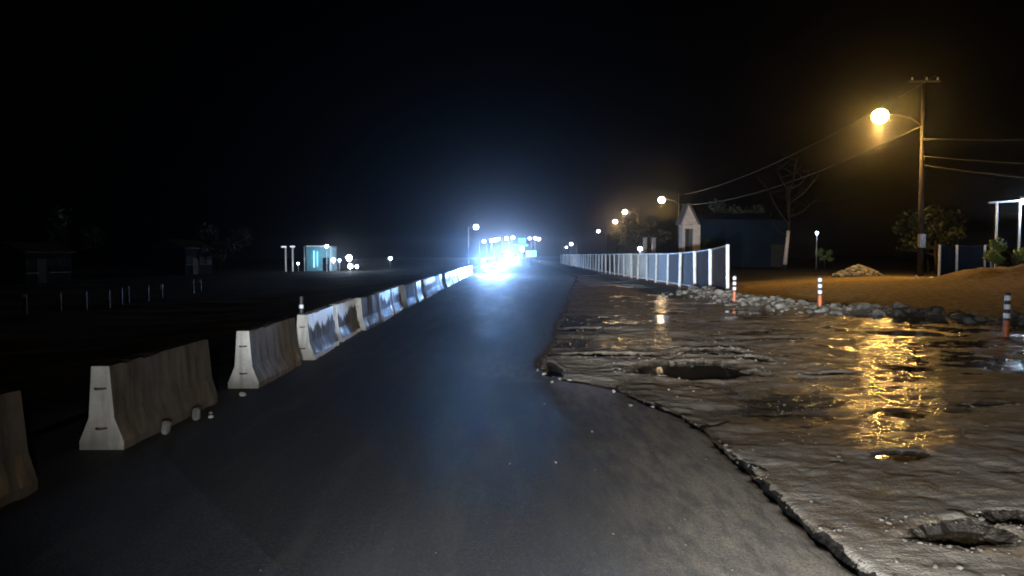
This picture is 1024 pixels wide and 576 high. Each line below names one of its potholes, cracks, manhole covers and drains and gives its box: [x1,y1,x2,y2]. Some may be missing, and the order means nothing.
pothole [898,518,1023,551]
pothole [629,361,763,381]
crack [617,391,877,576]
